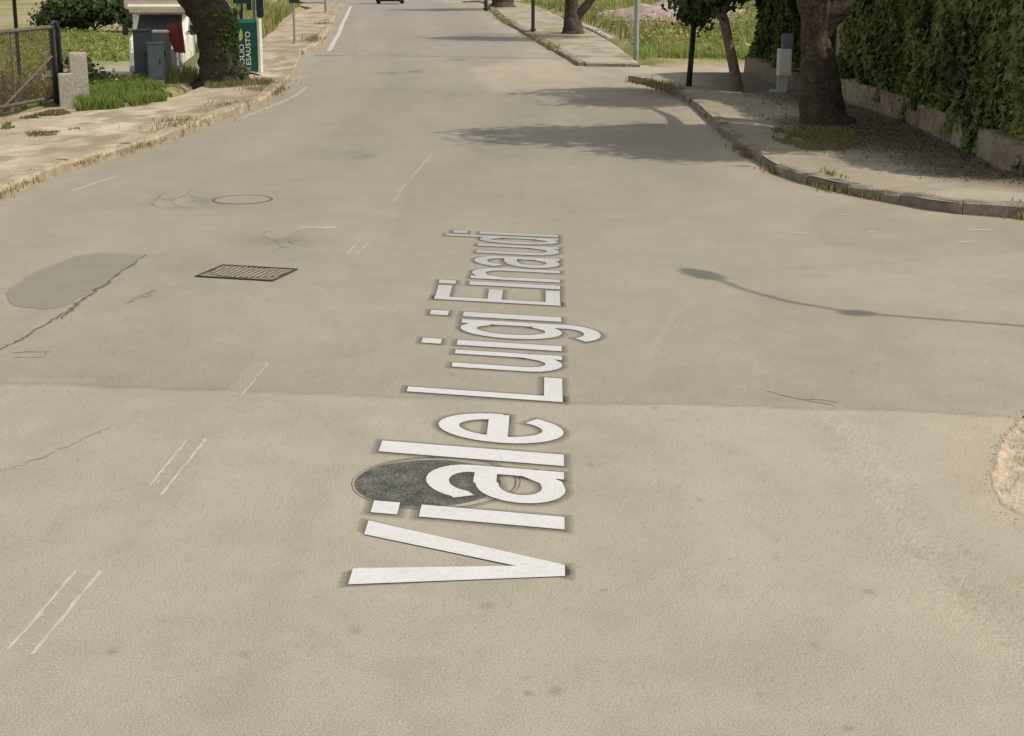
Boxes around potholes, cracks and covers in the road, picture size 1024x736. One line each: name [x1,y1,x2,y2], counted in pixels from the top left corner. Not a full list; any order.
crack [0,425,112,472]
drain grate [195,264,298,281]
pothole [984,405,1024,524]
manhole cover [212,195,273,204]
crack [0,255,153,356]
